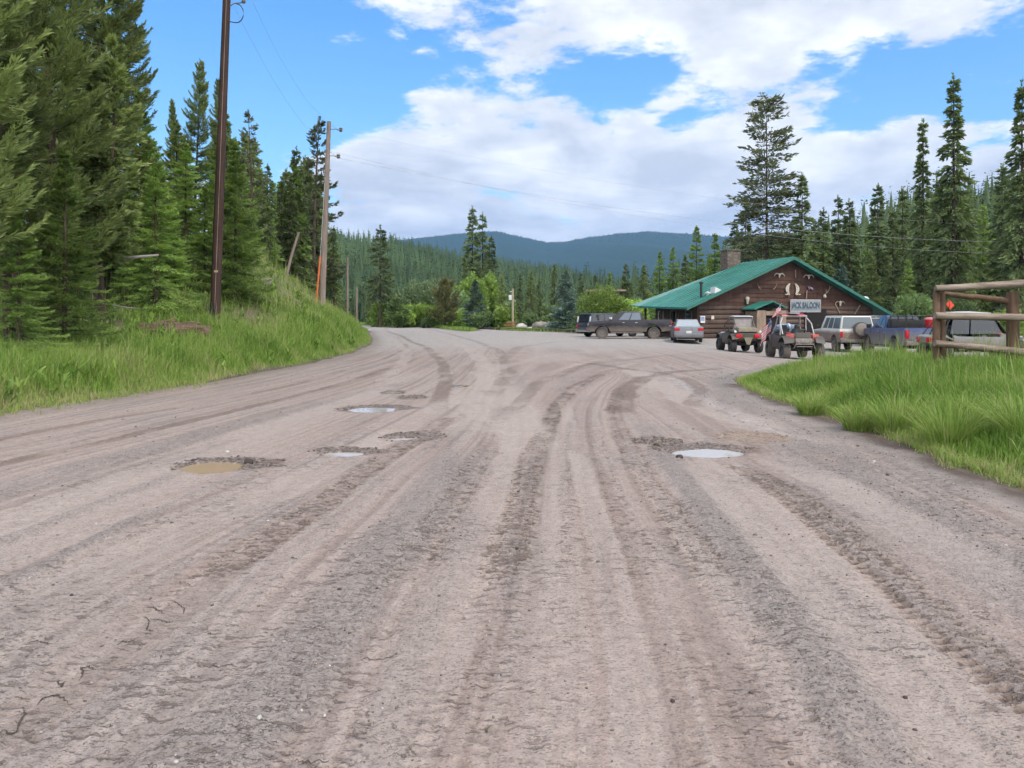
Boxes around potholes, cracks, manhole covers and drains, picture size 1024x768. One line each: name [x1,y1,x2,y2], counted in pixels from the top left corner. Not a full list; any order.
pothole [629,436,683,446]
crack [117,600,185,645]
pothole [307,446,385,457]
pothole [170,455,287,474]
pothole [643,442,760,458]
crack [0,665,96,734]
pothole [333,404,420,413]
pothole [378,431,447,442]
